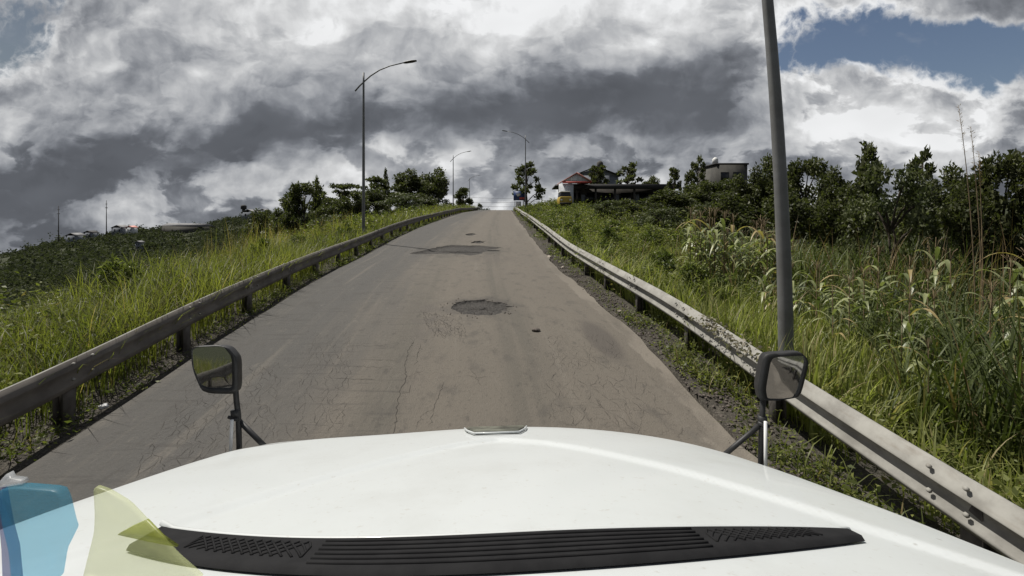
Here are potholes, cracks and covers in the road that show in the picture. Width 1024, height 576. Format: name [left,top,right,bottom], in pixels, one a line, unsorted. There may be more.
crack [277,310,466,438]
crack [136,365,281,477]
crack [546,335,685,443]
pothole [451,299,512,315]
